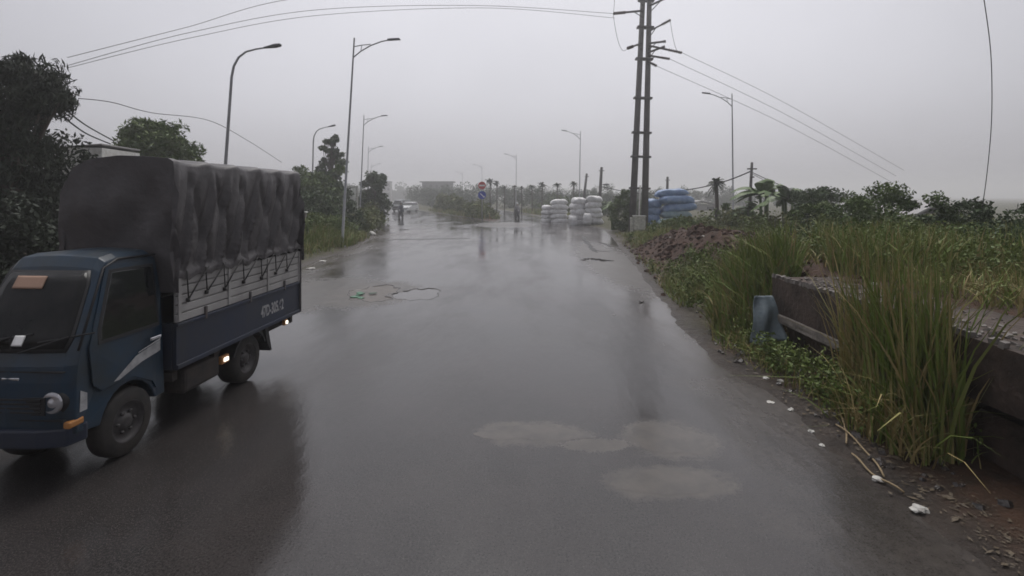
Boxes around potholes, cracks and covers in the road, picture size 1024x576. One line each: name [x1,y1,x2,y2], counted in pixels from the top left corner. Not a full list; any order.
pothole [347,284,400,302]
pothole [385,288,441,301]
